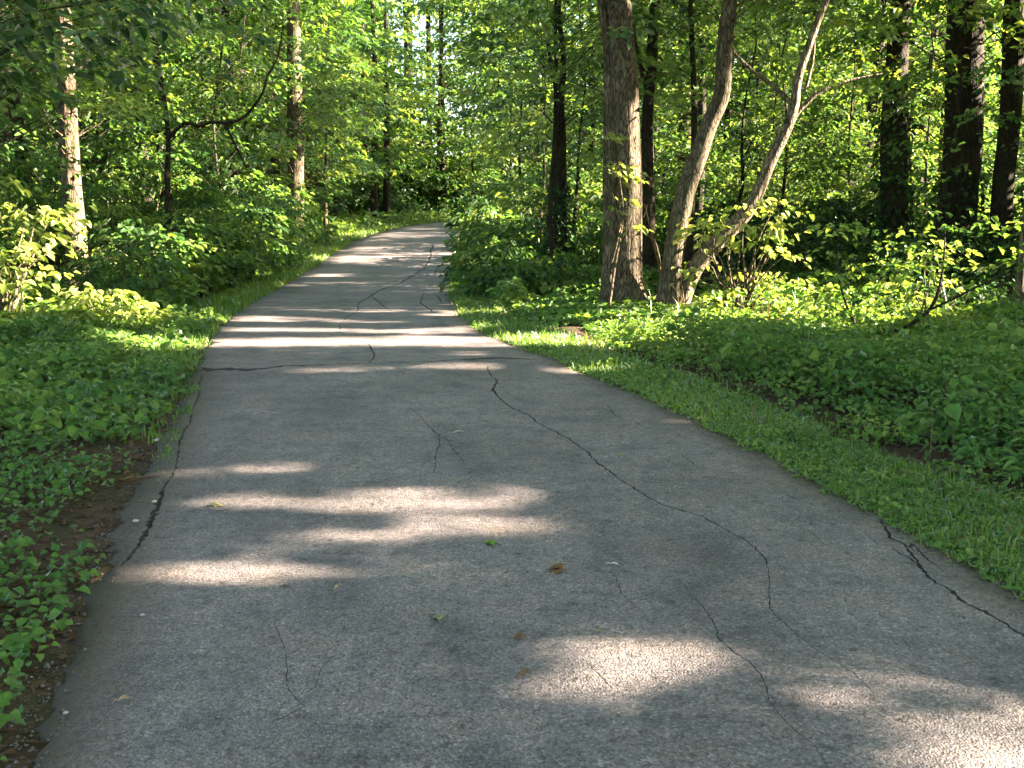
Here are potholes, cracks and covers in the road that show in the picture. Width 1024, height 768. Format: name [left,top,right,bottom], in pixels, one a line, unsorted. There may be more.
crack [339,245,443,329]
crack [864,520,1024,637]
crack [121,344,881,767]
